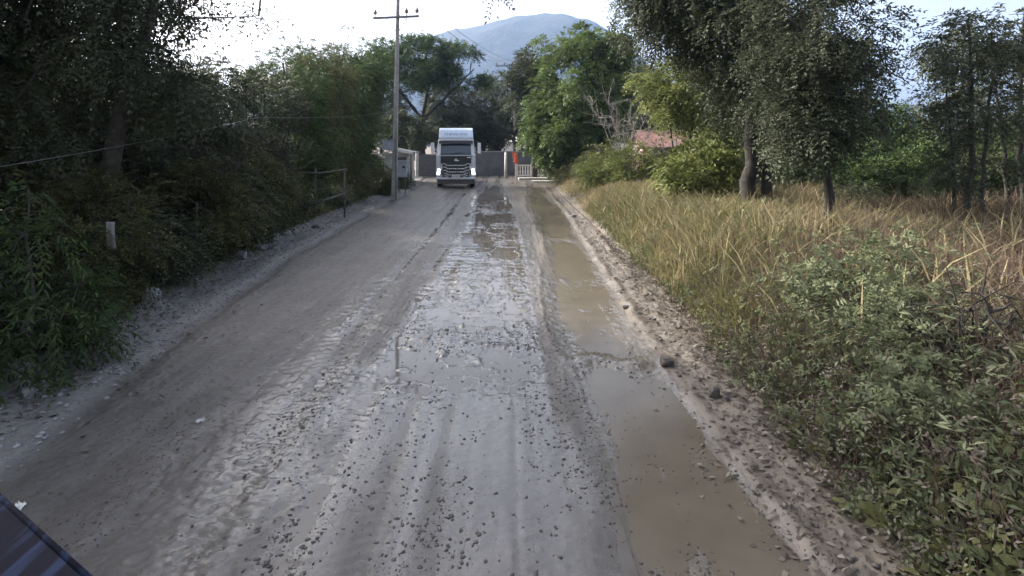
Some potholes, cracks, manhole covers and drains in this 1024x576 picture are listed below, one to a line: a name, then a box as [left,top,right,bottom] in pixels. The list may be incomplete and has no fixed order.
pothole [486,246,523,262]
